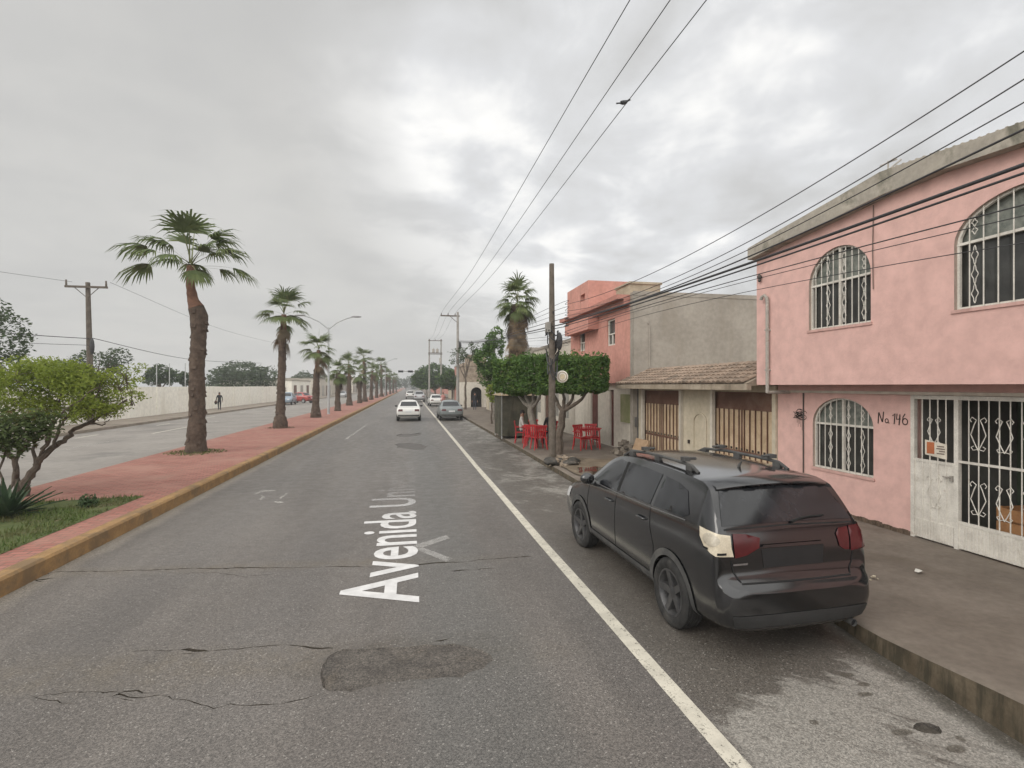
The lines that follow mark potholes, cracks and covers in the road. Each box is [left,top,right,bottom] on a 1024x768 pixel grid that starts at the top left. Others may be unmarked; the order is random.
crack [35,556,531,582]
crack [142,644,329,662]
crack [33,690,311,709]
pothole [914,722,942,734]
